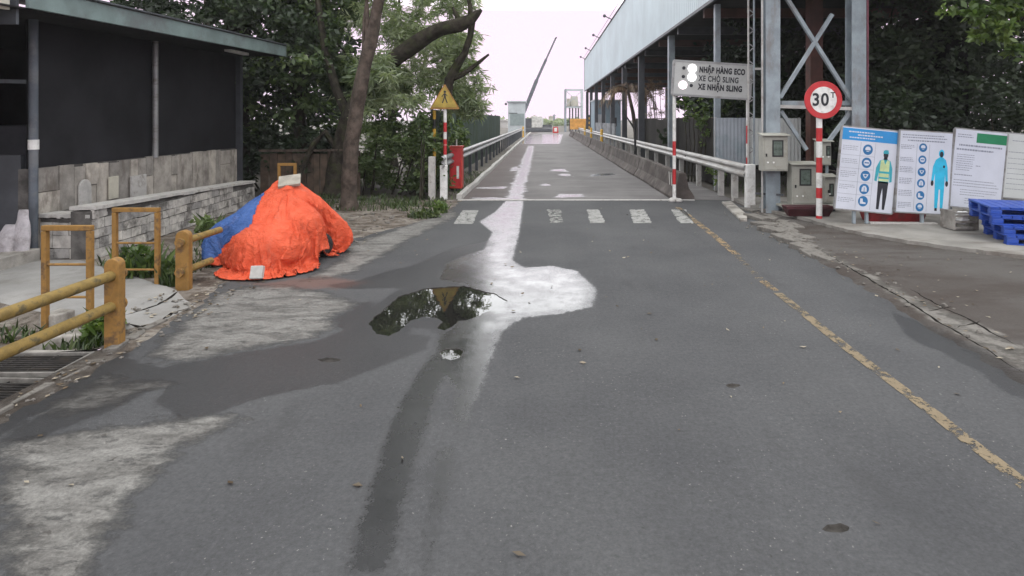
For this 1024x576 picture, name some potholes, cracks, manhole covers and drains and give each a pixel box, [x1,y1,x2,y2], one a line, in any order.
crack [831,256,1022,372]
crack [130,292,185,328]
pothole [823,523,849,533]
drain grate [0,351,95,378]
drain grate [0,377,44,401]
